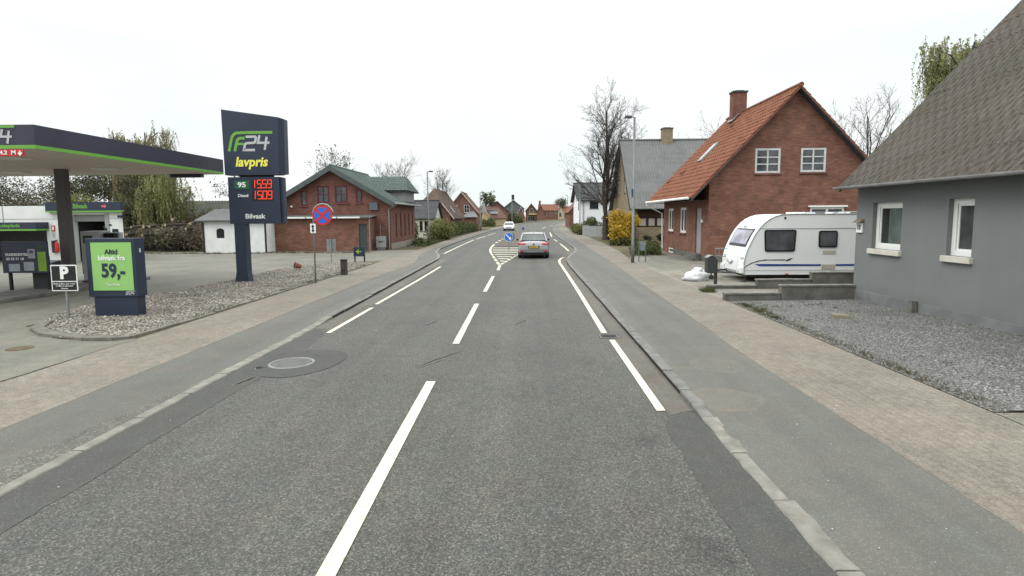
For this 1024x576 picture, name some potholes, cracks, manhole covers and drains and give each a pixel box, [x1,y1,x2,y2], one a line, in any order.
manhole cover [268,357,315,369]
